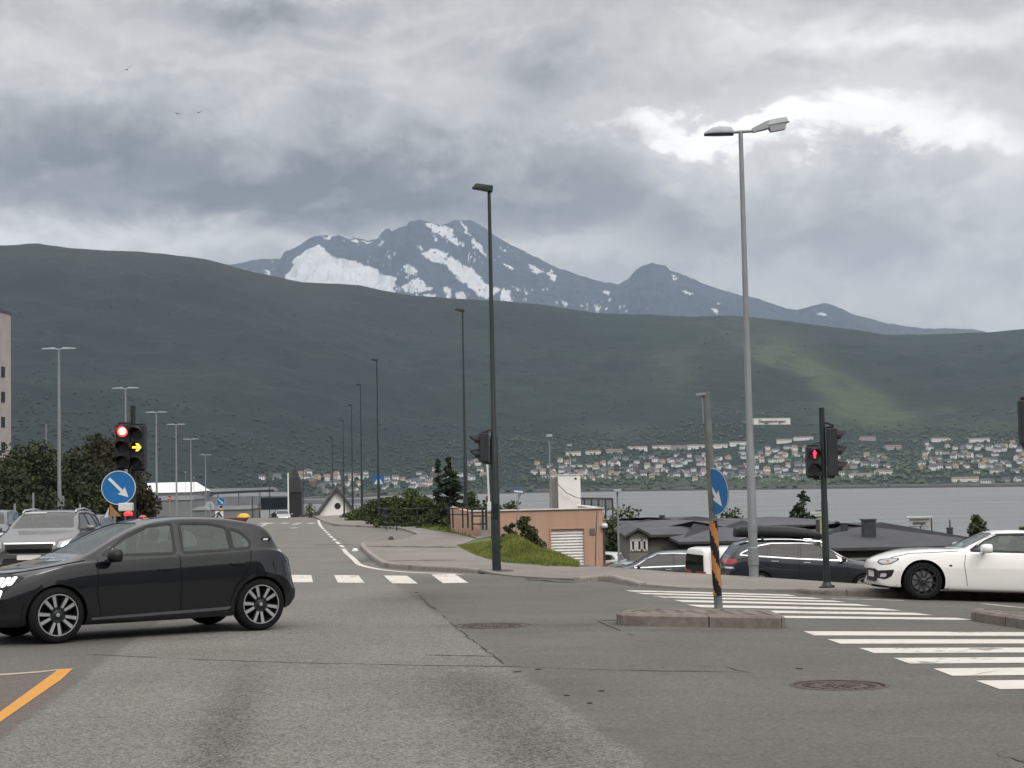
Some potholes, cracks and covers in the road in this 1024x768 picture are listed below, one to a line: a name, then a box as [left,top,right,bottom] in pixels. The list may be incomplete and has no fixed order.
manhole cover [789,680,890,691]
